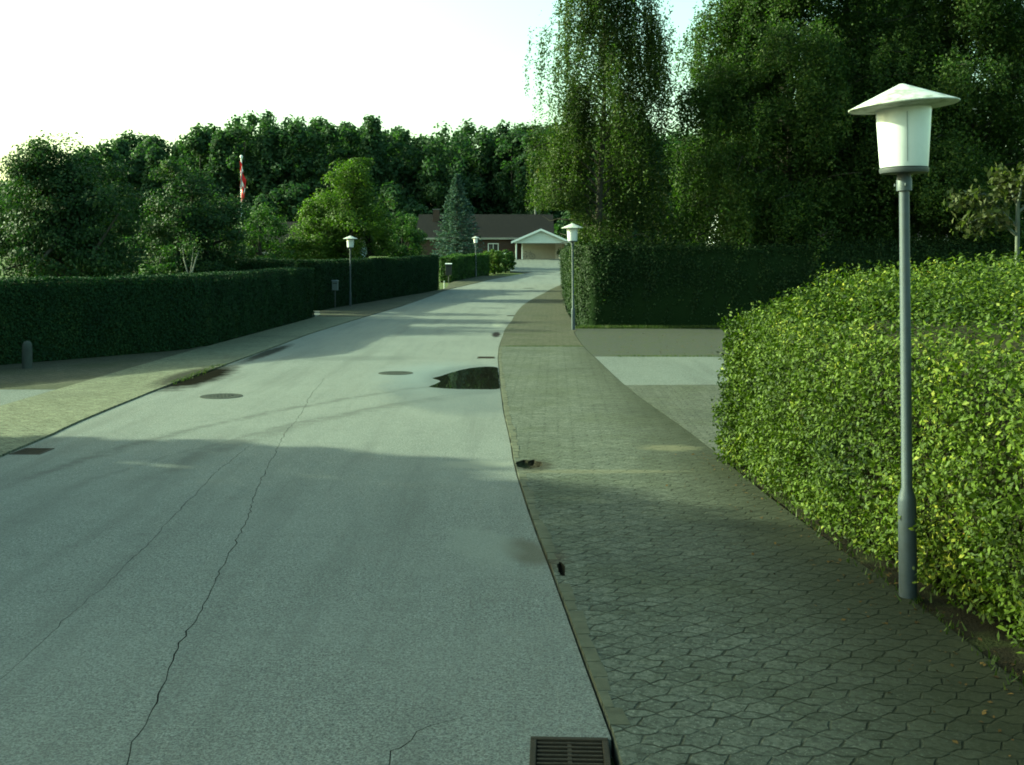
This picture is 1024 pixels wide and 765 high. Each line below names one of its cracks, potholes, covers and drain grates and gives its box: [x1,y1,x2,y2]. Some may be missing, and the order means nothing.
crack [127,380,323,765]
crack [389,717,463,765]
drain grate [529,736,611,765]
